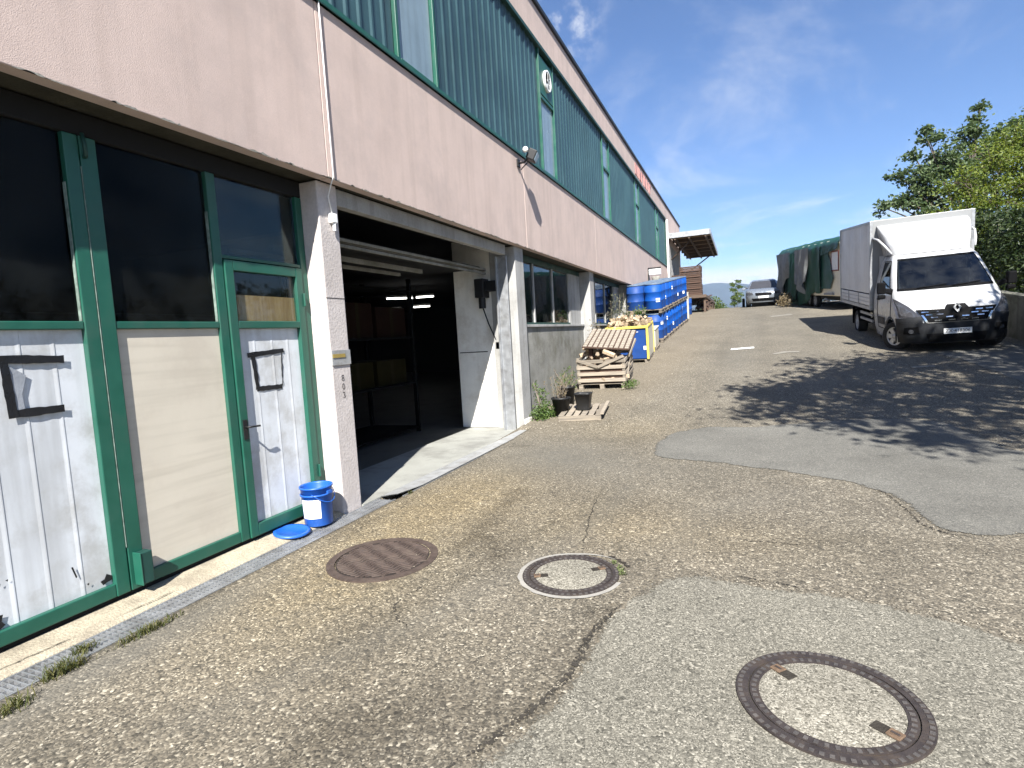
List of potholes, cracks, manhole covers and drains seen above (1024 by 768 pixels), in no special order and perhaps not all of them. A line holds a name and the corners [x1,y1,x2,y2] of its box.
manhole cover [517,553,630,599]
manhole cover [736,651,938,768]
manhole cover [326,538,438,583]
